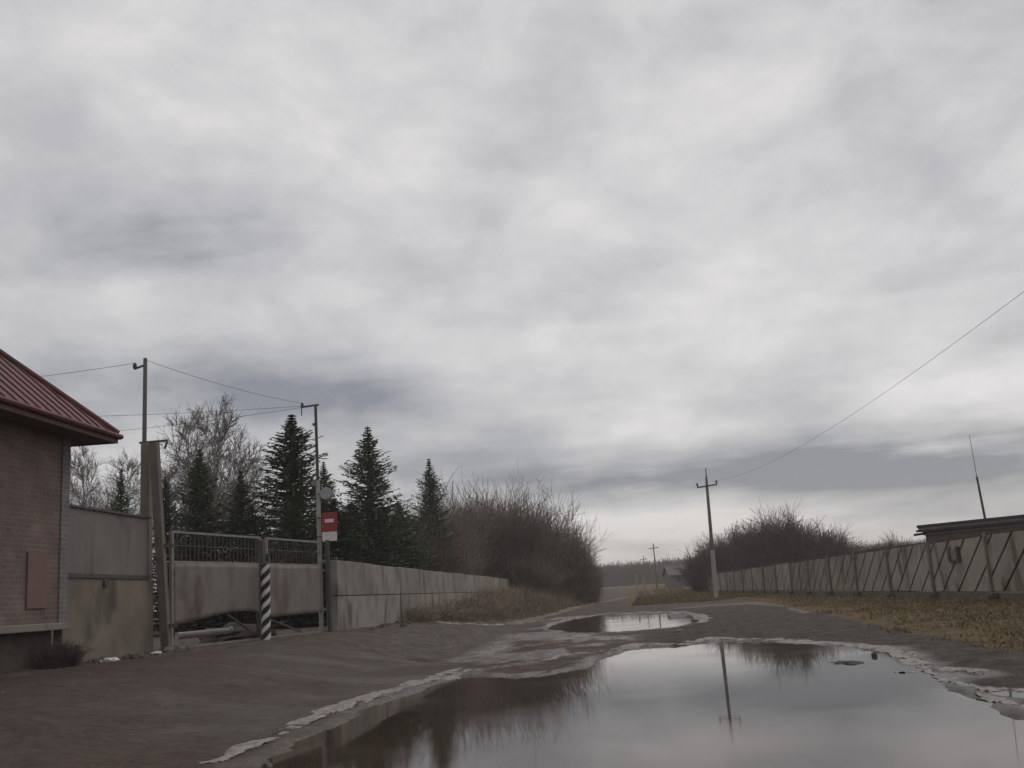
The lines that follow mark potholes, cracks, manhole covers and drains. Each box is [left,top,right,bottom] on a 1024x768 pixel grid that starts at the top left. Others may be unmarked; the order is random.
pothole [543,611,713,633]
pothole [184,637,1024,768]
